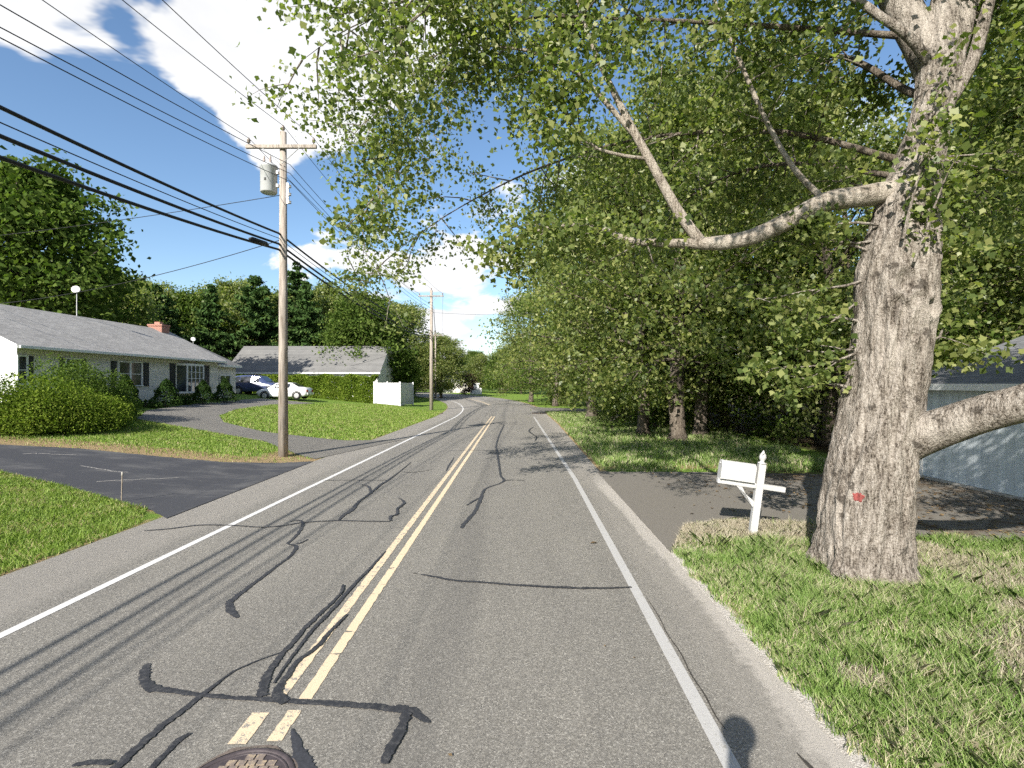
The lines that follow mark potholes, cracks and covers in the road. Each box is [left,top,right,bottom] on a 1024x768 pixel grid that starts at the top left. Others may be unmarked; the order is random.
manhole cover [197,745,298,768]
